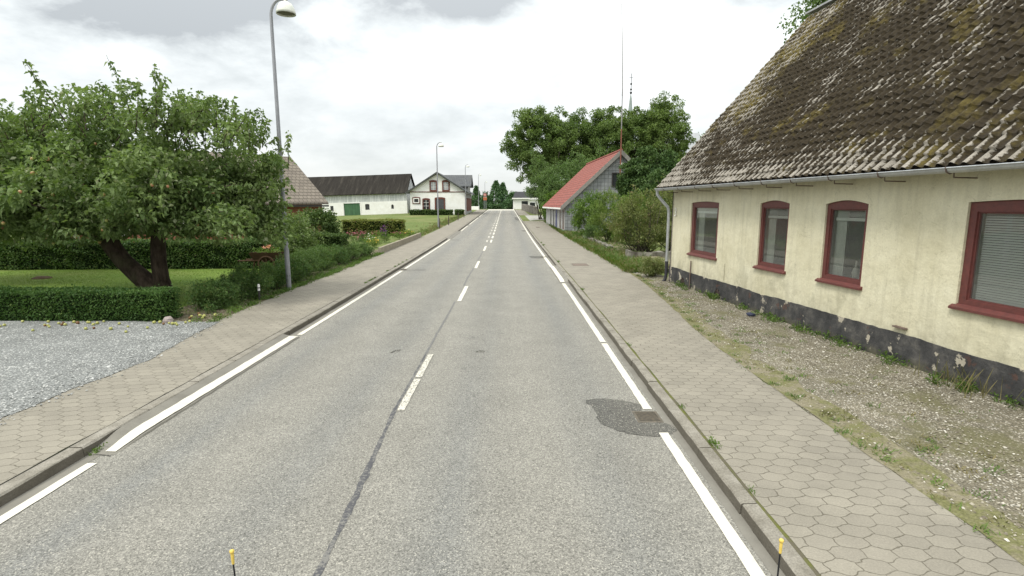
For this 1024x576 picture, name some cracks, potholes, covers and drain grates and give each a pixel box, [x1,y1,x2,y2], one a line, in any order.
drain grate [632,411,664,423]
